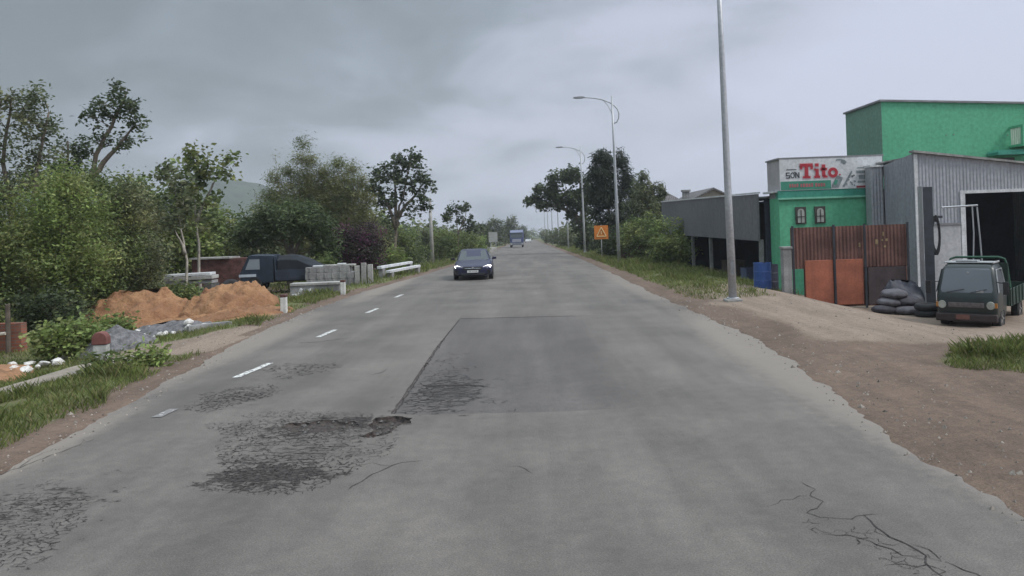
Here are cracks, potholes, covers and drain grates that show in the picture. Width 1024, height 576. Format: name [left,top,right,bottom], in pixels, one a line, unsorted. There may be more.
crack [770,483,980,576]
crack [0,479,87,570]
crack [185,362,420,494]
crack [397,352,518,414]
pothole [360,416,412,438]
